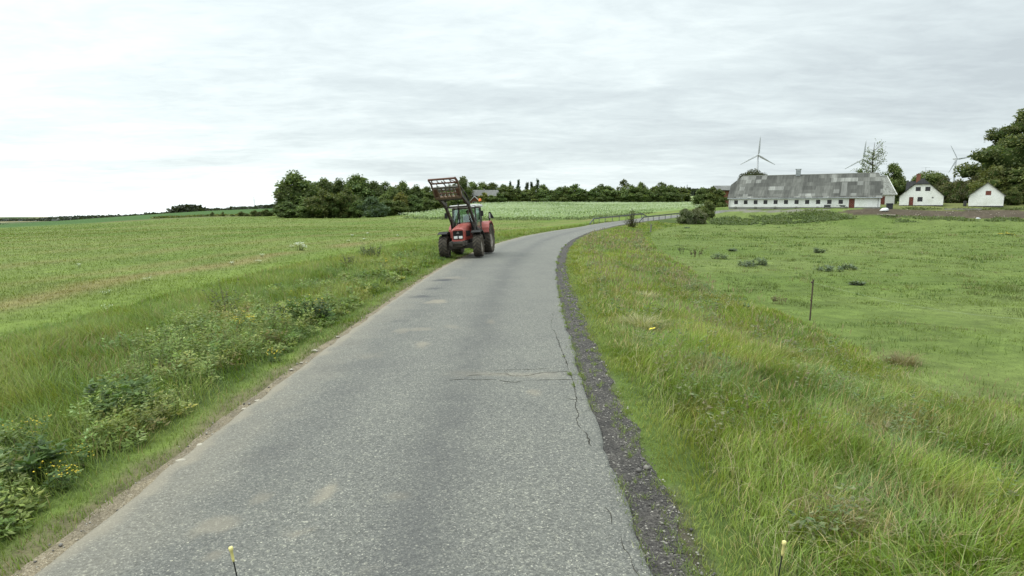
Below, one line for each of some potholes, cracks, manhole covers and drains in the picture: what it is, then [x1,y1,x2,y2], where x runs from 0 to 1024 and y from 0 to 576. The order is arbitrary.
crack [454,312,590,444]
